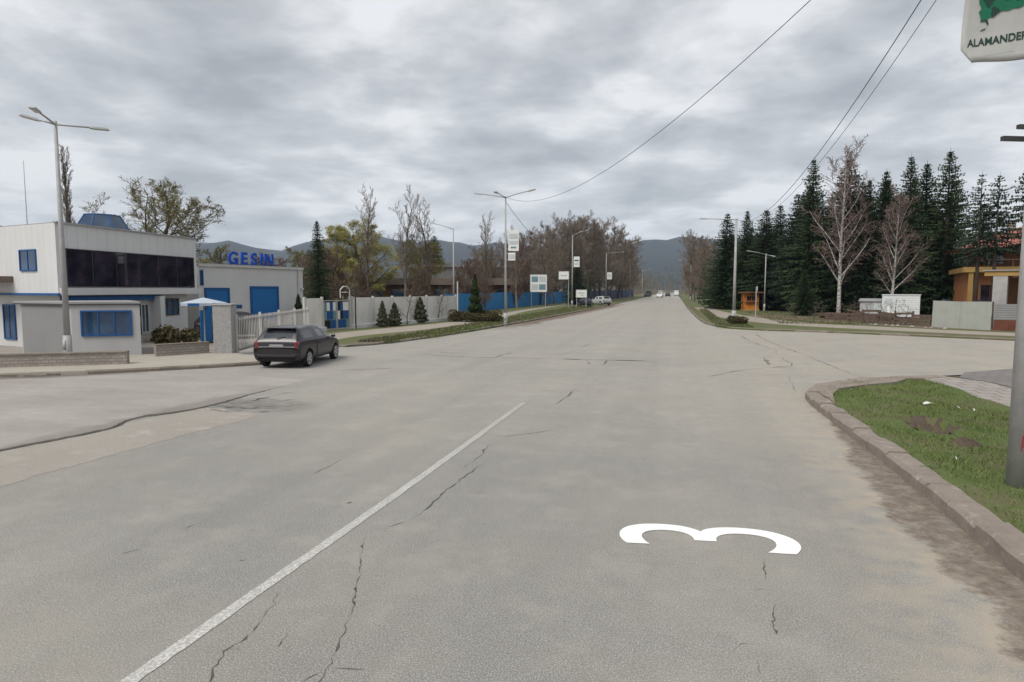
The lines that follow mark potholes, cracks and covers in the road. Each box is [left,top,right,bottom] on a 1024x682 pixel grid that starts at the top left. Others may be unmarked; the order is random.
crack [304,535,366,682]
crack [210,599,276,681]
crack [710,357,811,390]
crack [380,444,492,529]
crack [756,563,780,634]
